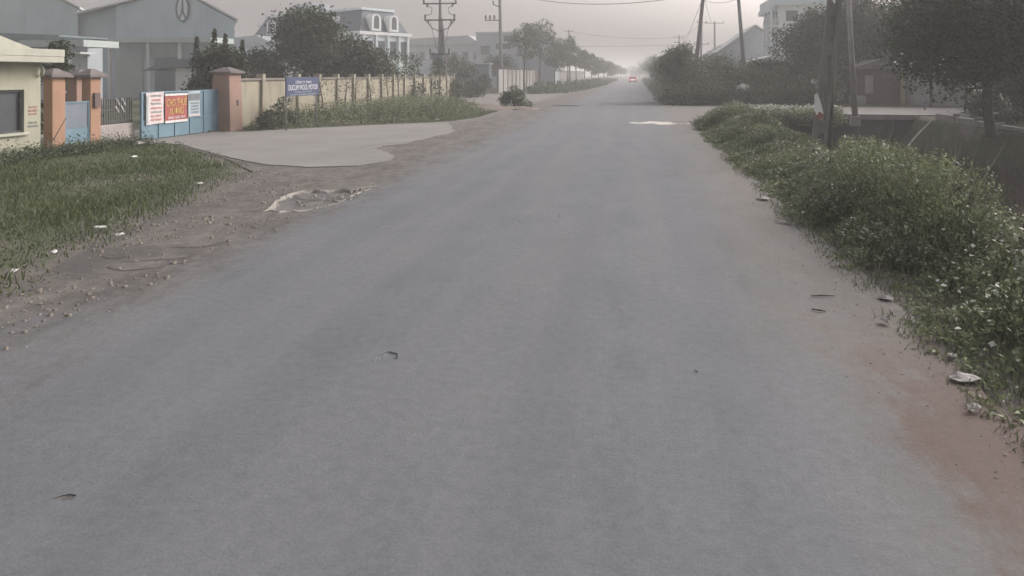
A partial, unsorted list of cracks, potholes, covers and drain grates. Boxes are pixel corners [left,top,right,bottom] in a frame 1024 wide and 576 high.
pothole [261,183,390,213]
pothole [371,351,398,363]
pothole [53,494,76,502]
